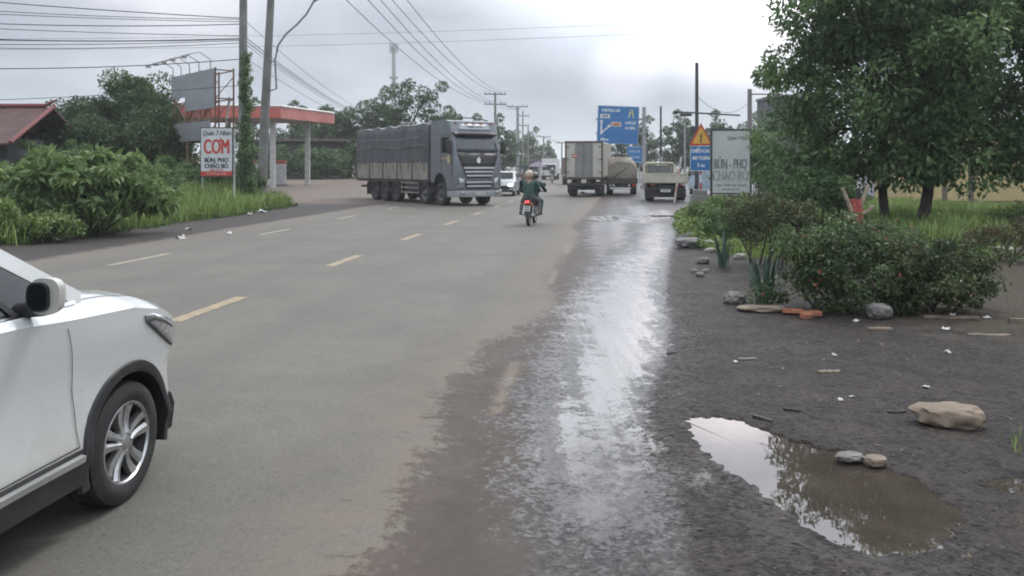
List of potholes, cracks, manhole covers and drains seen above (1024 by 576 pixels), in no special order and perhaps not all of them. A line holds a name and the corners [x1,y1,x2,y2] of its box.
pothole [671,411,996,567]
